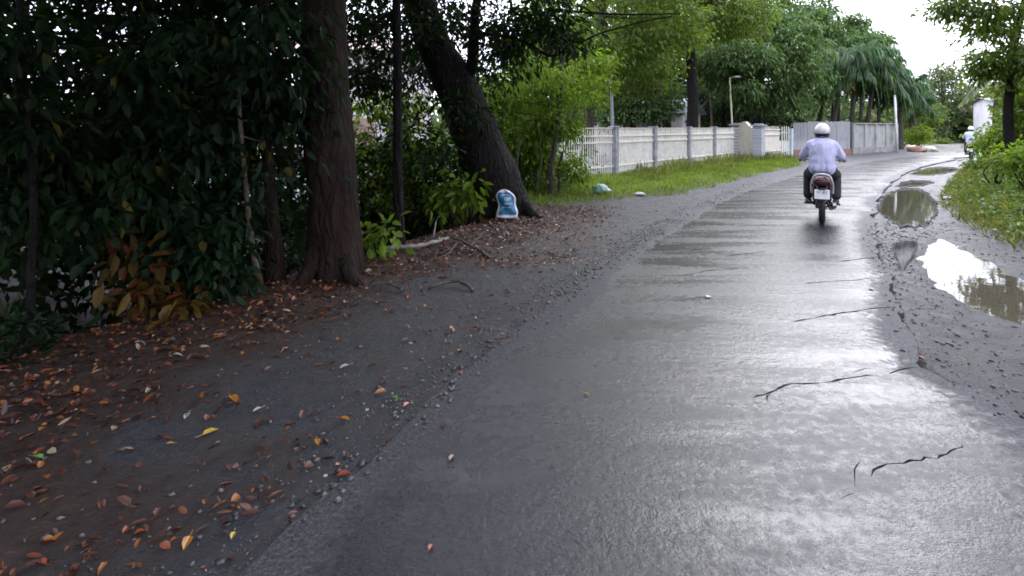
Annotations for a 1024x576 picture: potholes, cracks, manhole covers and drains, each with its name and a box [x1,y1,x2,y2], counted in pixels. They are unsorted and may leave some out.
pothole [892,240,918,271]
crack [753,367,917,401]
crack [791,306,891,322]
pothole [877,187,939,228]
crack [837,444,963,500]
